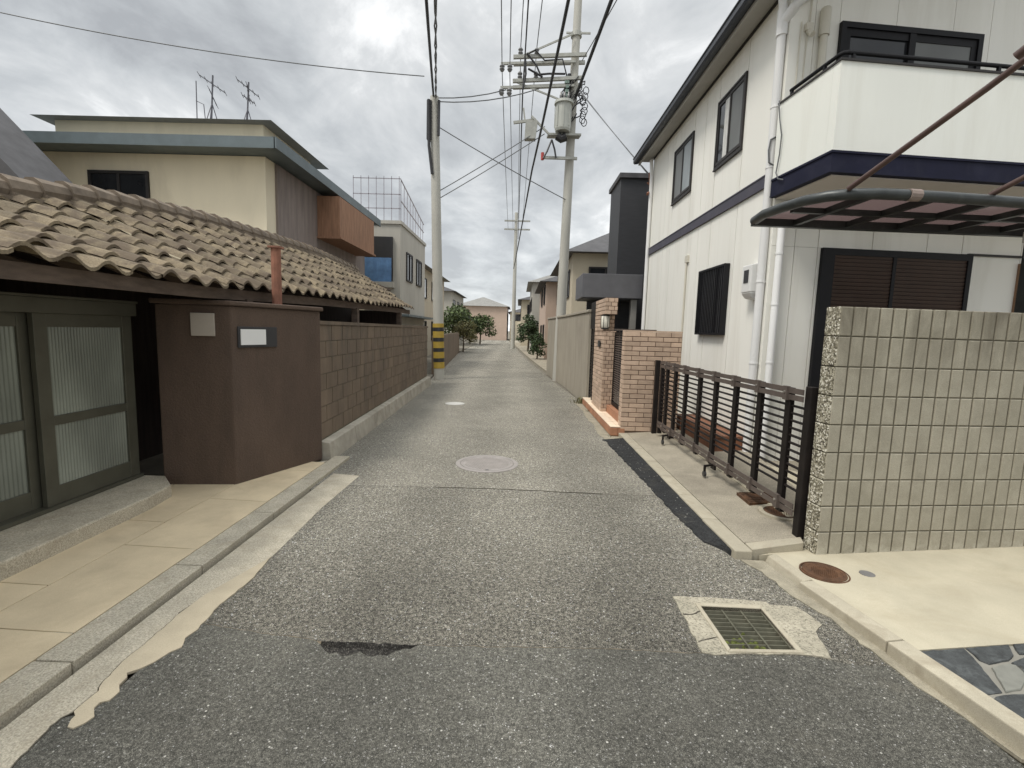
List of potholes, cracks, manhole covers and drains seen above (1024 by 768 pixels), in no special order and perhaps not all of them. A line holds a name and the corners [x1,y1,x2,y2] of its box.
drain grate [672,596,831,660]
manhole cover [799,561,851,584]
manhole cover [456,455,518,473]
pothole [316,640,420,657]
